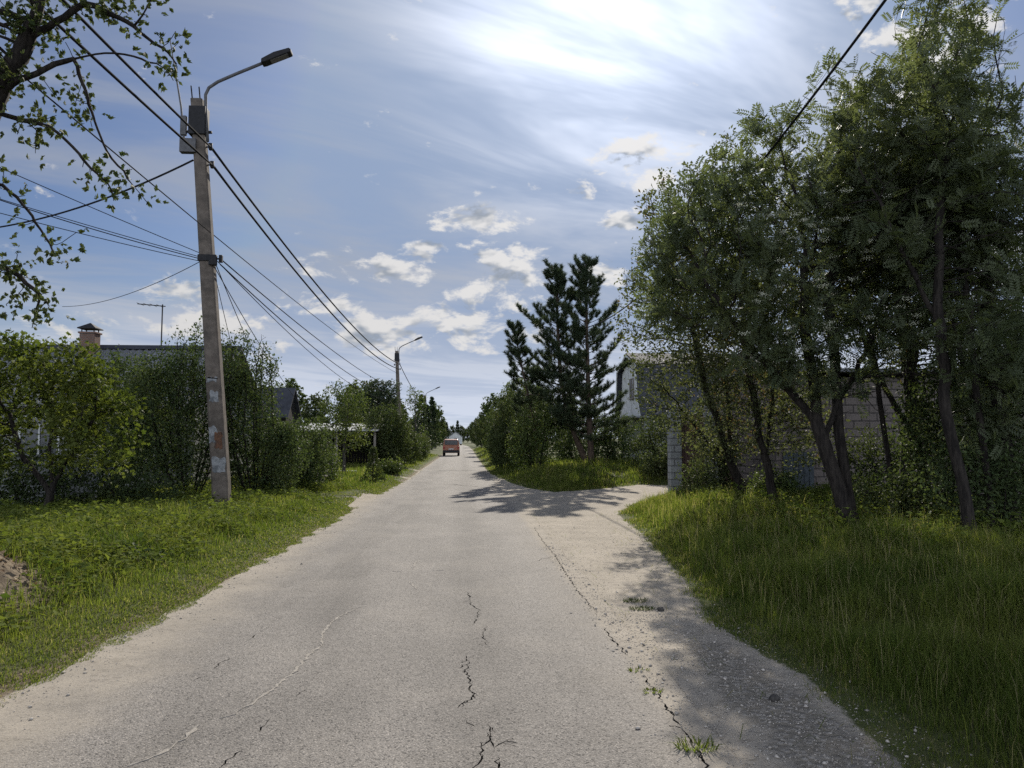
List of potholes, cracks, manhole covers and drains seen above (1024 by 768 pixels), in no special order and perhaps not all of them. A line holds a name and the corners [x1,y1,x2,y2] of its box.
crack [534,528,710,768]
crack [458,593,516,768]
crack [123,607,361,768]
